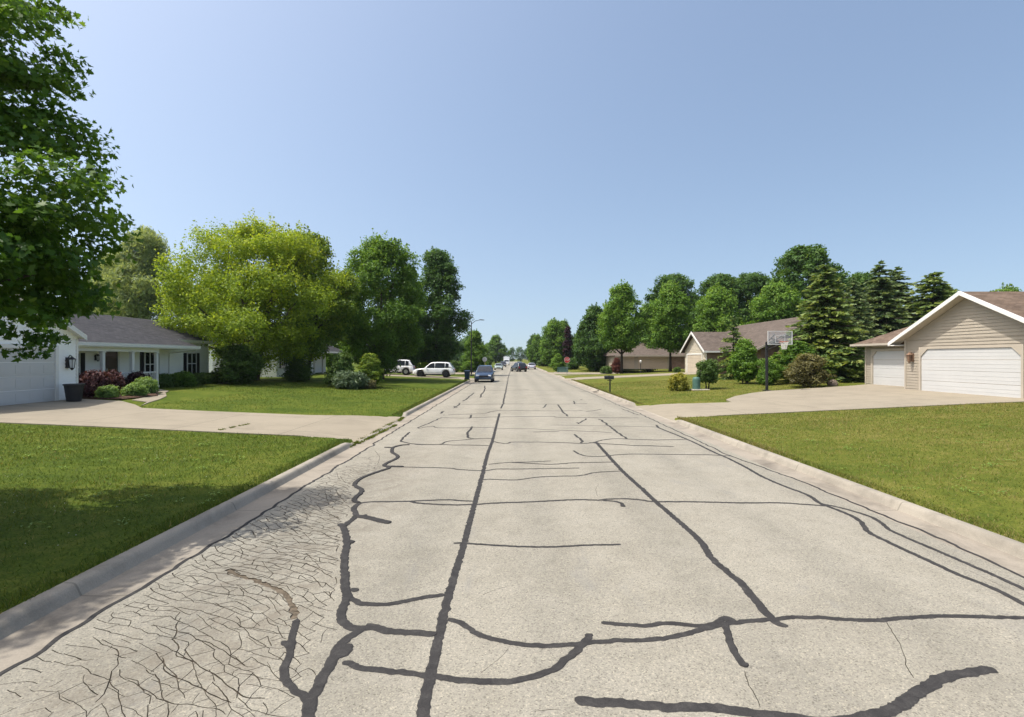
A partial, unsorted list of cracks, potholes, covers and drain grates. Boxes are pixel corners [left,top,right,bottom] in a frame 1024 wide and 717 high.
crack [0,452,381,717]
